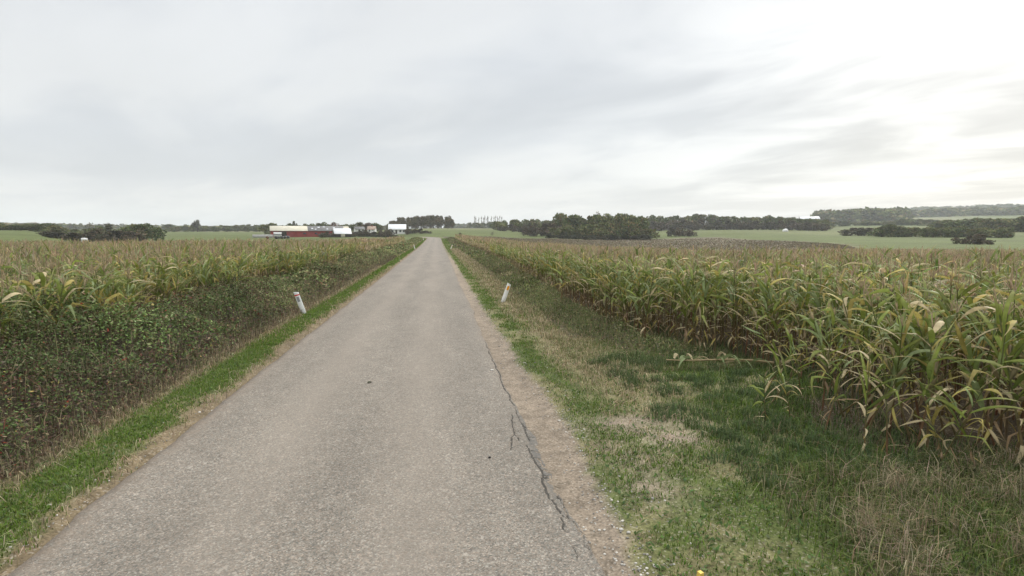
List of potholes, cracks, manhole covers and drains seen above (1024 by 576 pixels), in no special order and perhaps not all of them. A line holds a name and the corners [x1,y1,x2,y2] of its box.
crack [486,343,589,558]
